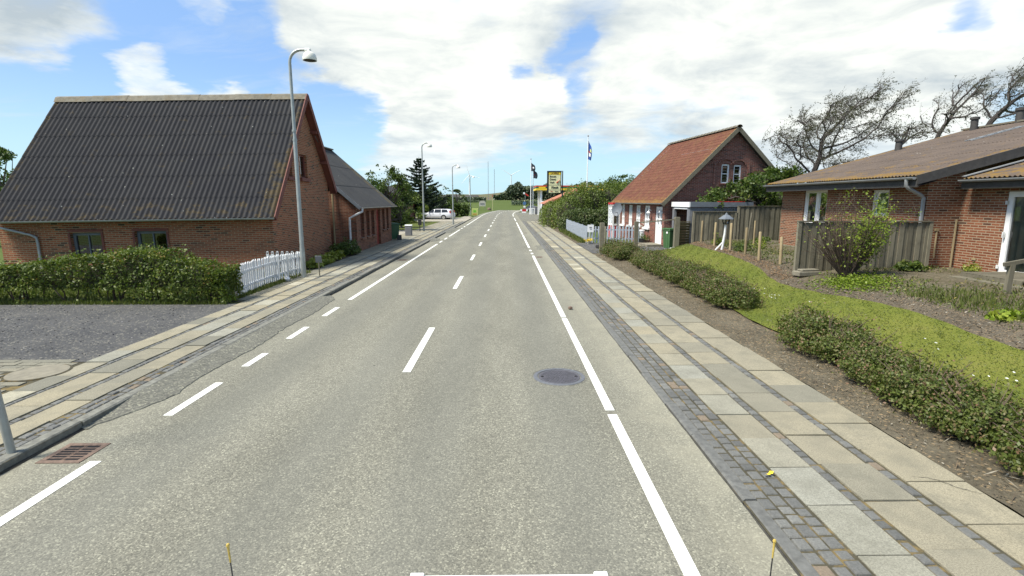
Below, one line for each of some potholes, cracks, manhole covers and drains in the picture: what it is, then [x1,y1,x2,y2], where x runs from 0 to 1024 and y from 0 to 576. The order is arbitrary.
drain grate [35,443,111,464]
manhole cover [0,364,73,382]
manhole cover [531,368,587,386]
